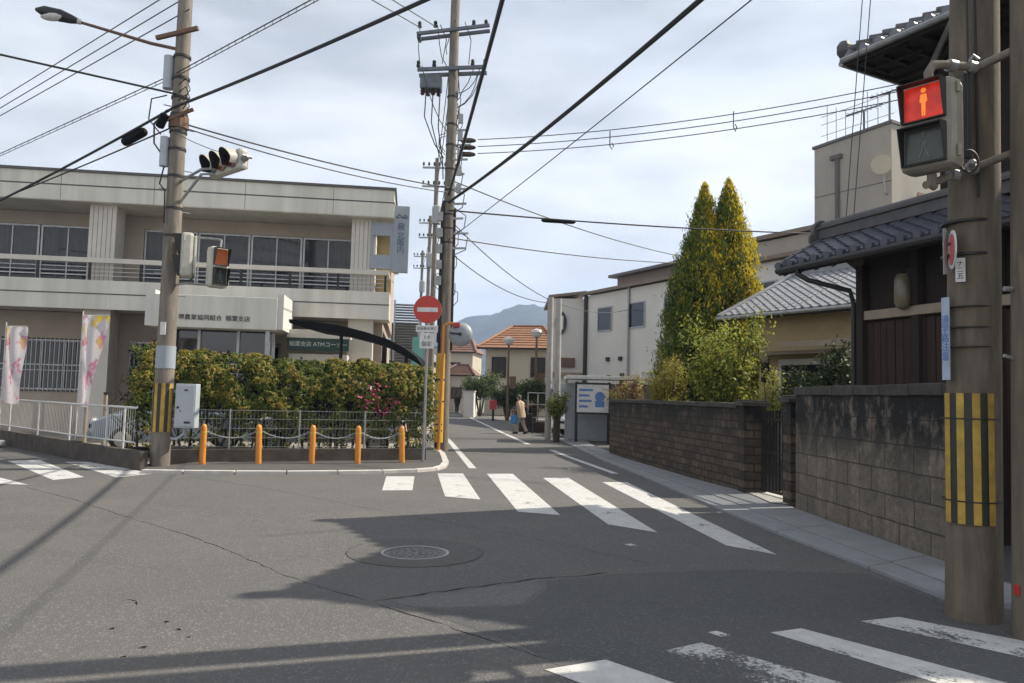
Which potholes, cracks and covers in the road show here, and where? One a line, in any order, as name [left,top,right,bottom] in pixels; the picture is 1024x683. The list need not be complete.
crack [377,572,608,659]
crack [26,487,366,601]
manhole cover [346,539,483,567]
